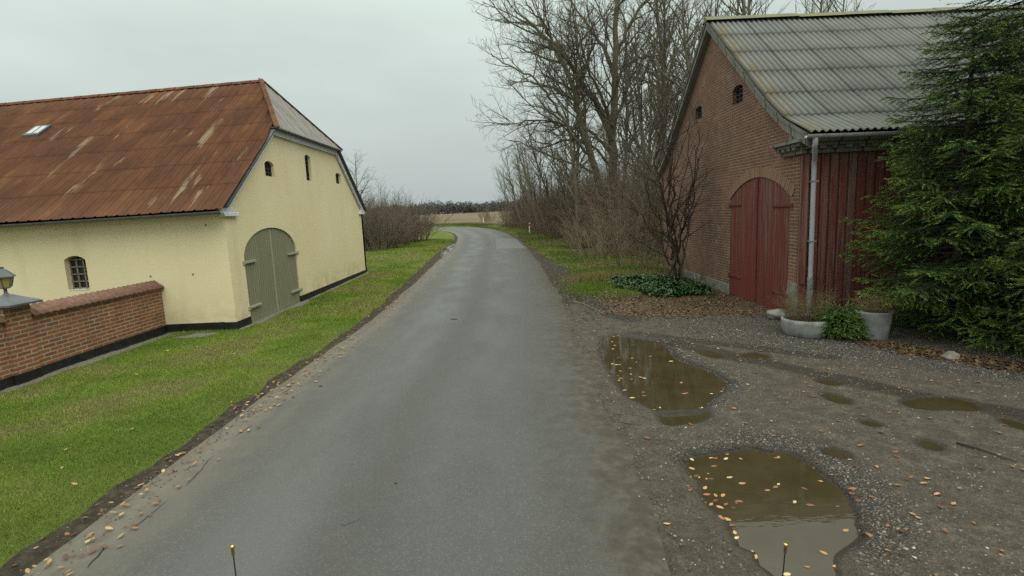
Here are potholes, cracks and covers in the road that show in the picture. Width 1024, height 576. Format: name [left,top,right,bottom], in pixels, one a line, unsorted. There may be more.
pothole [855,418,889,429]
pothole [911,437,951,454]
pothole [992,414,1024,432]
pothole [812,378,849,387]
pothole [737,351,774,360]
pothole [894,393,991,412]
pothole [594,333,738,417]
pothole [653,408,716,427]
pothole [816,391,856,406]
pothole [674,443,877,576]
